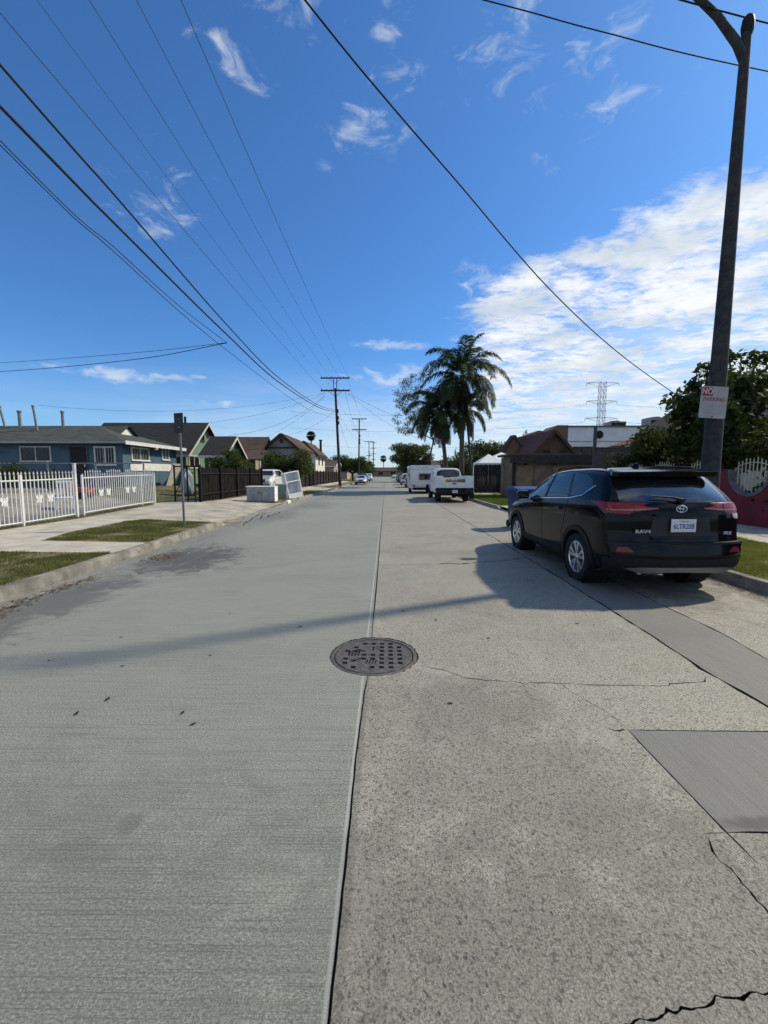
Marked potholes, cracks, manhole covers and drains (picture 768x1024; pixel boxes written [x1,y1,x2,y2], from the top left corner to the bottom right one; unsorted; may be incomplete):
crack [624,991,768,1024]
manhole cover [329,637,419,676]
crack [708,839,768,913]
crack [424,666,710,732]
